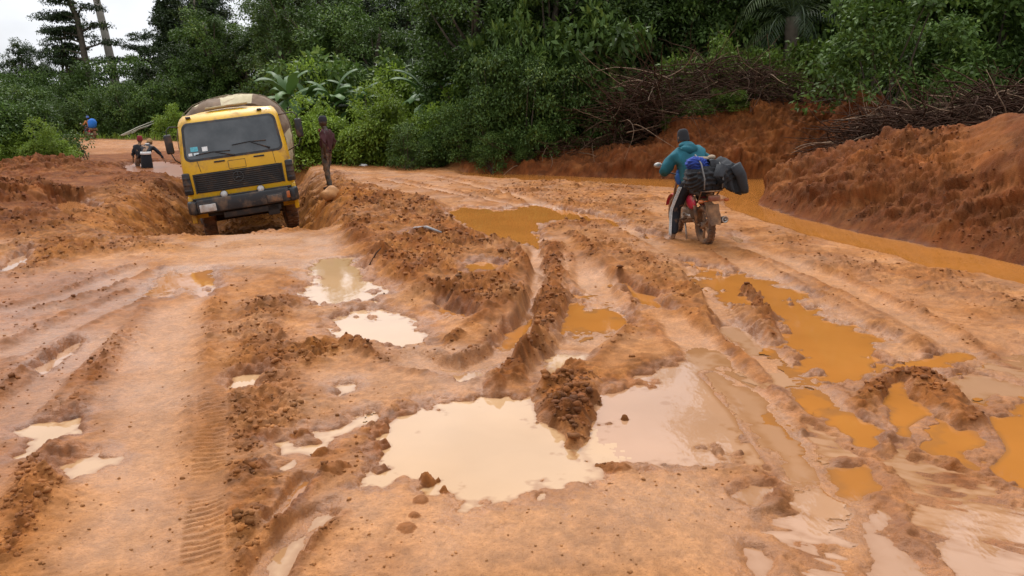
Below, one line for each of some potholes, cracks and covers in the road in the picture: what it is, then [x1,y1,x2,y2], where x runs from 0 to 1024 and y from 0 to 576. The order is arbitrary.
pothole [573,348,835,493]
pothole [321,302,438,349]
pothole [3,406,96,461]
pothole [355,390,632,513]
pothole [441,205,629,250]
pothole [293,257,390,306]
pothole [684,261,905,391]
